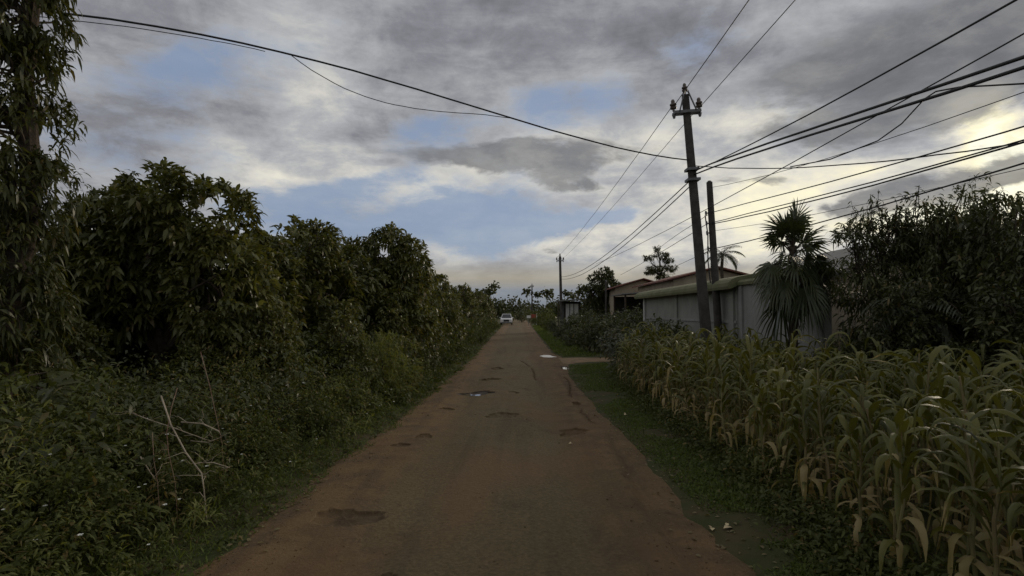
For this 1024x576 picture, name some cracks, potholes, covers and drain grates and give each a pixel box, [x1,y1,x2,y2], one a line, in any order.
pothole [448,389,515,398]
pothole [472,410,532,420]
crack [501,360,610,428]
pothole [372,439,429,452]
